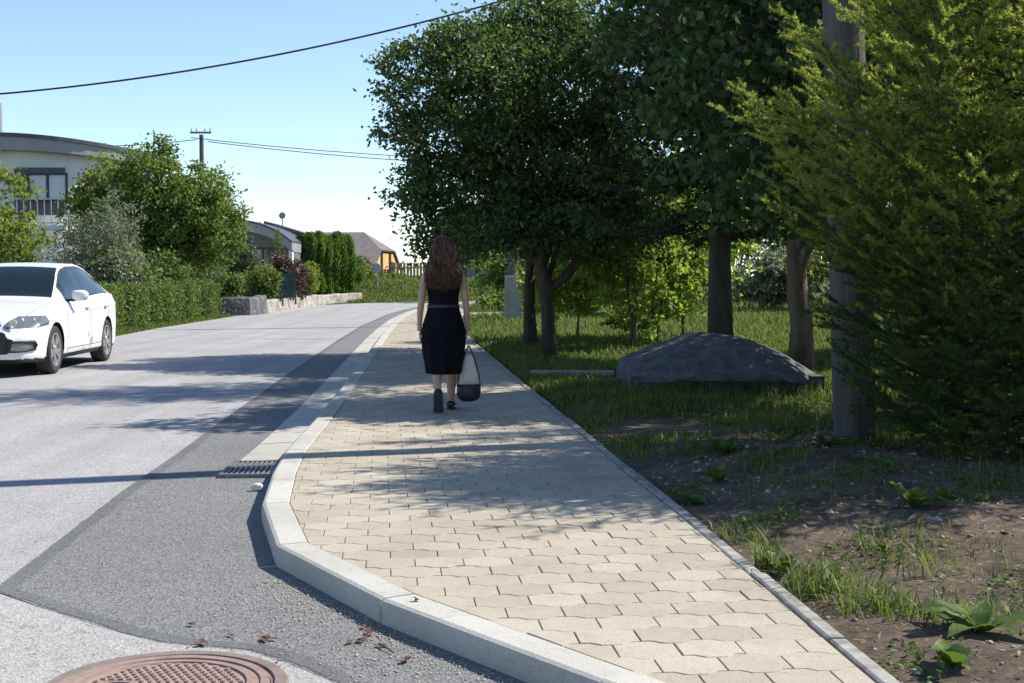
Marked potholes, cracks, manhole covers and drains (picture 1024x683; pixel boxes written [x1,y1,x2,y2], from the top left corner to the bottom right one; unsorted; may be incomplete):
manhole cover [47,651,289,683]
drain grate [218,460,280,478]
